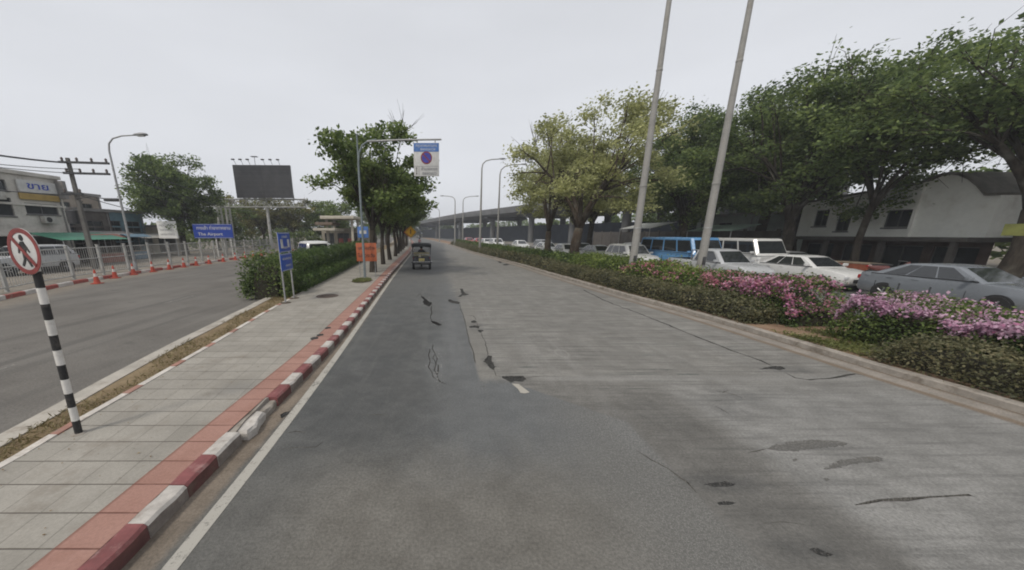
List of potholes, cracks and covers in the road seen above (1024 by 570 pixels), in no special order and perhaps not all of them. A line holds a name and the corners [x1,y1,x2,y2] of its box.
crack [638,451,697,493]
crack [428,346,445,384]
crack [855,494,977,505]
